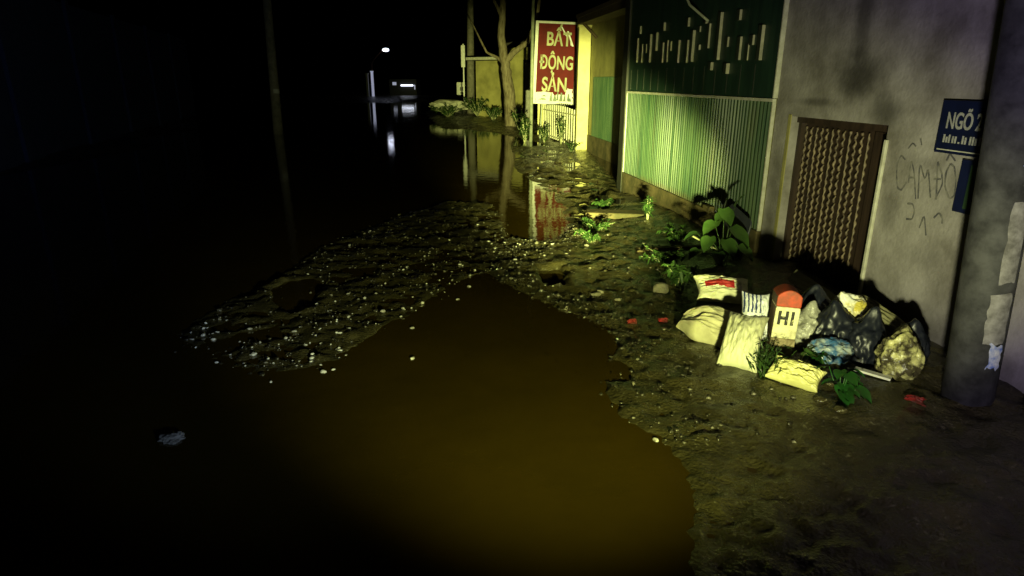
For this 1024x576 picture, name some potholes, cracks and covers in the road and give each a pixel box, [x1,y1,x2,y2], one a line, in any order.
pothole [524,260,582,292]
pothole [0,272,698,576]
